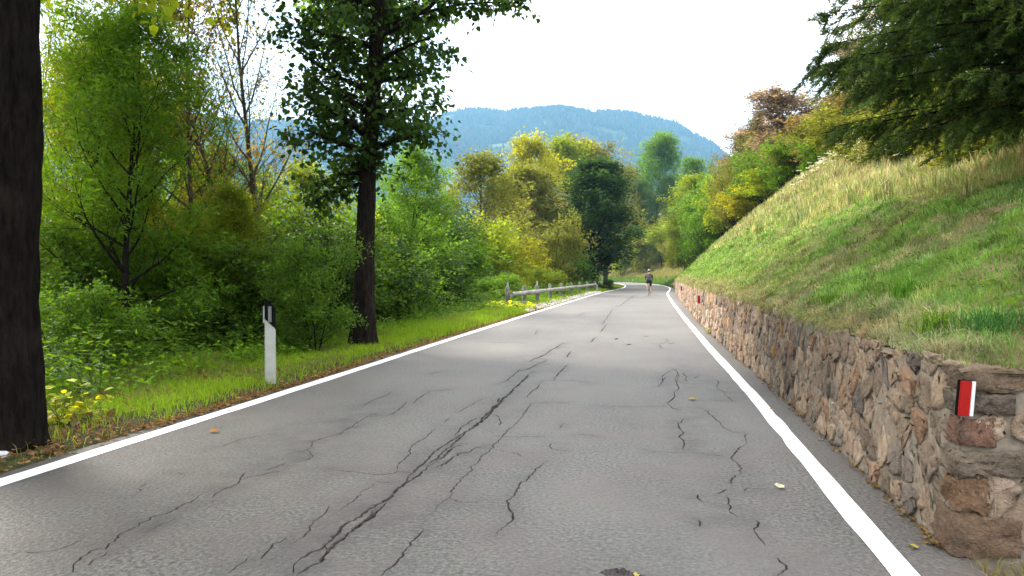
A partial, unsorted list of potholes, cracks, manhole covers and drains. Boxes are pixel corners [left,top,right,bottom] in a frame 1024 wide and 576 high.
crack [753,520,788,576]
crack [3,333,593,576]
crack [612,368,771,516]
pothole [600,567,644,576]
